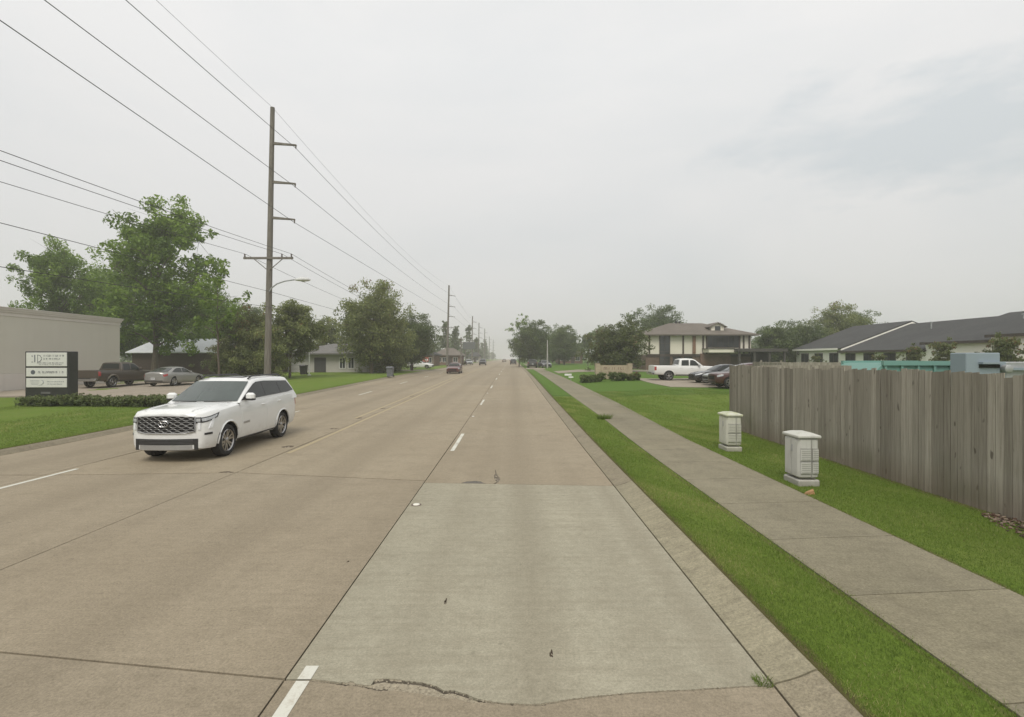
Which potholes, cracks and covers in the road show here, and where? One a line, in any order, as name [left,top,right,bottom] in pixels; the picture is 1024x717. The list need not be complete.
crack [306,679,758,706]
